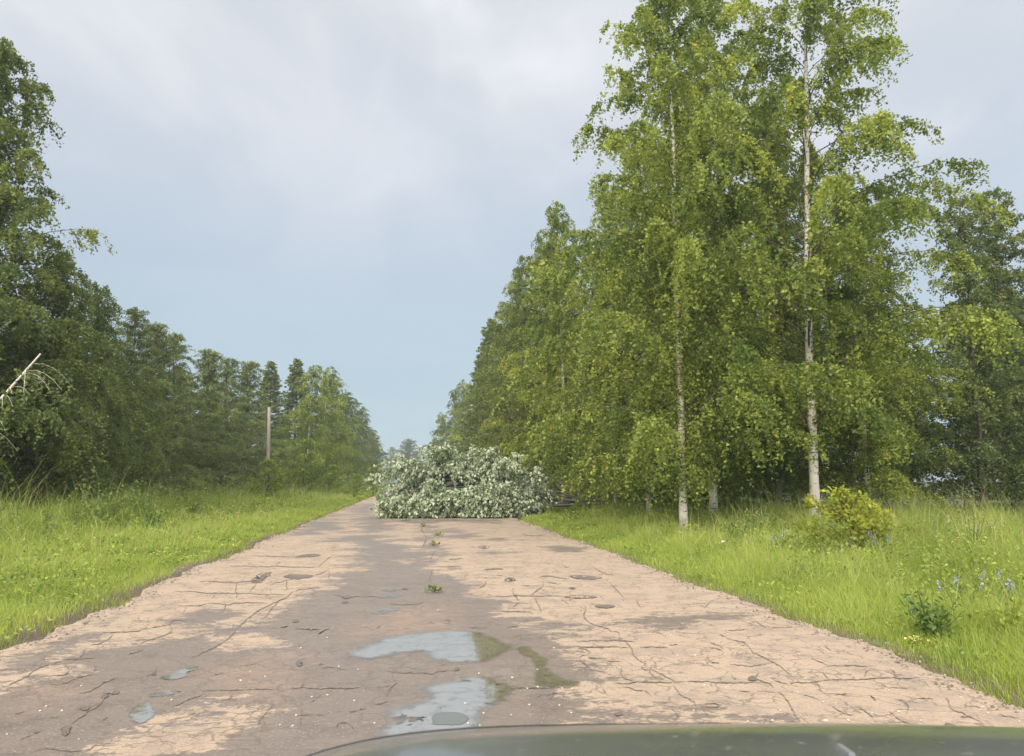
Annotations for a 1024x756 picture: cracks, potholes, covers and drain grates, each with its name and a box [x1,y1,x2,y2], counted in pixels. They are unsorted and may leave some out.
crack [7,546,336,725]
pothole [432,712,469,725]
crack [168,664,448,729]
crack [421,521,462,582]
crack [478,566,984,725]
